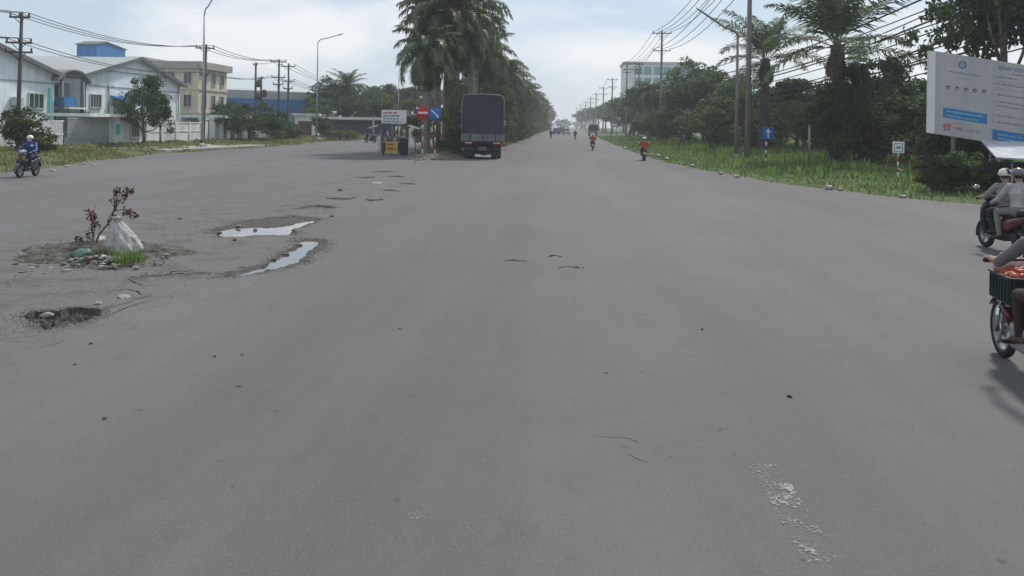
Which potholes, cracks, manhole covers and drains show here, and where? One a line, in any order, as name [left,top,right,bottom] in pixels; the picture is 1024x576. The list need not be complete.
pothole [19,307,102,330]
pothole [211,215,322,237]
pothole [212,238,330,278]
crack [107,270,194,314]
